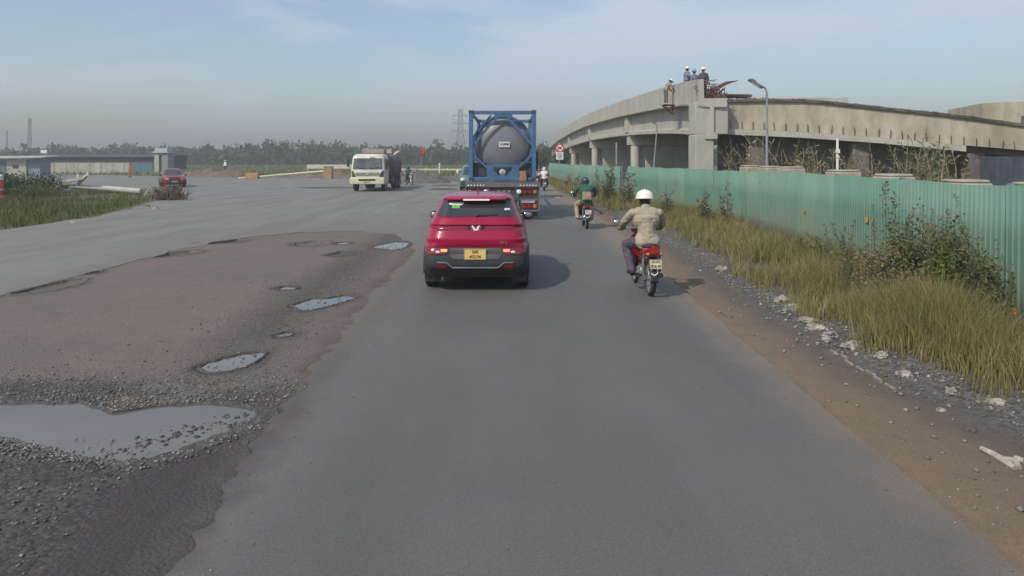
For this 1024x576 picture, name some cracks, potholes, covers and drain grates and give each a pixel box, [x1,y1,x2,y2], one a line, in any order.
pothole [149,250,206,258]
pothole [289,294,359,311]
pothole [195,351,269,374]
pothole [4,278,89,297]
pothole [370,241,411,251]
pothole [0,399,282,466]
